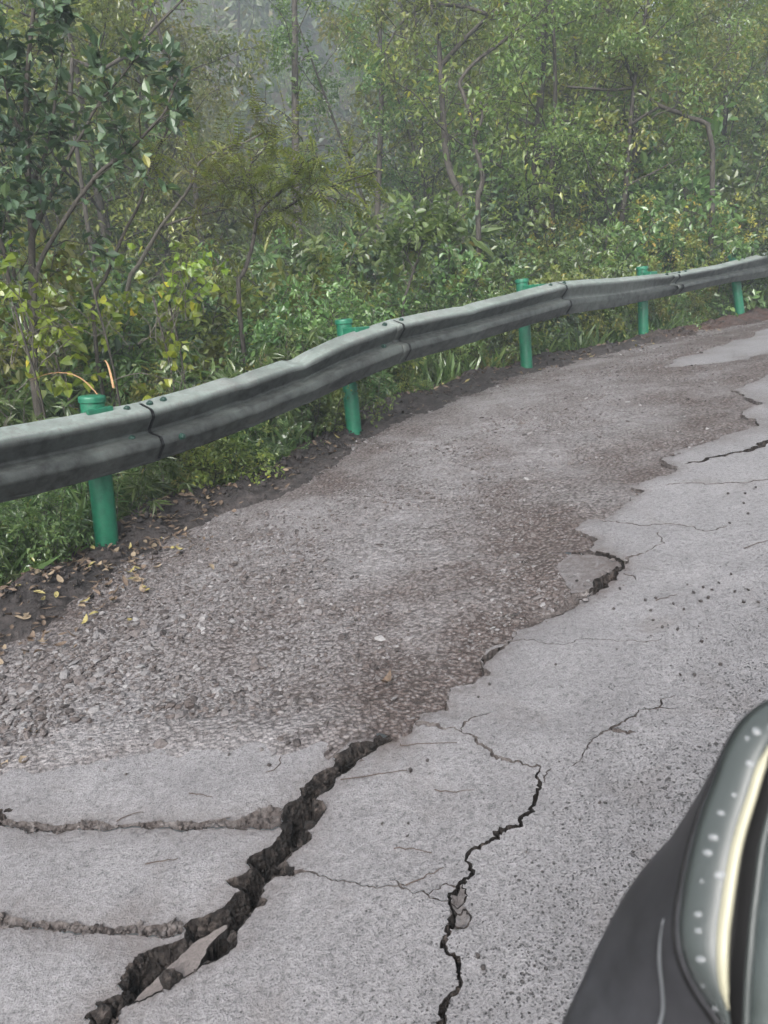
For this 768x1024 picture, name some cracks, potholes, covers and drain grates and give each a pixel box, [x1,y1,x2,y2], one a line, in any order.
crack [0,712,552,1024]
crack [506,520,727,645]
crack [667,440,768,485]
crack [571,695,679,766]
